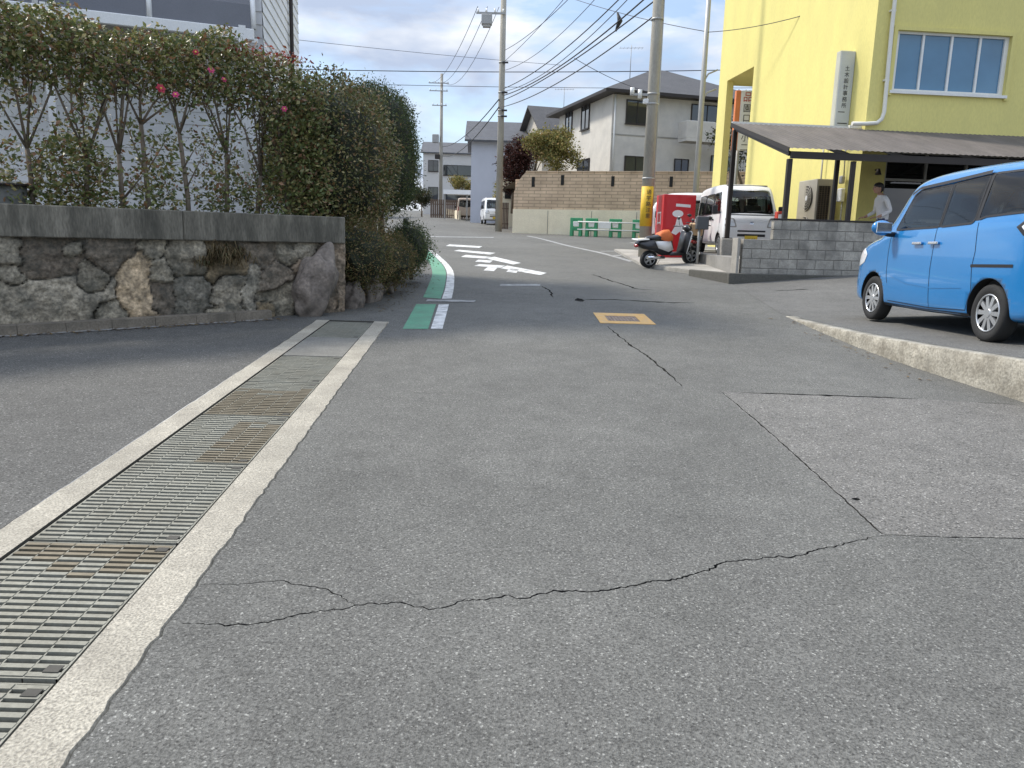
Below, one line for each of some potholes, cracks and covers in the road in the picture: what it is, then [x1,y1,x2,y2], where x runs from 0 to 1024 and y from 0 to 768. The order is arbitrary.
drain grate [32,462,247,547]
drain grate [139,415,289,466]
drain grate [0,541,176,685]
drain grate [203,382,319,418]
crack [182,536,880,627]
drain grate [248,356,342,384]
drain grate [0,682,54,748]
manhole cover [594,313,656,325]
crack [609,328,682,386]
crack [585,275,685,303]
